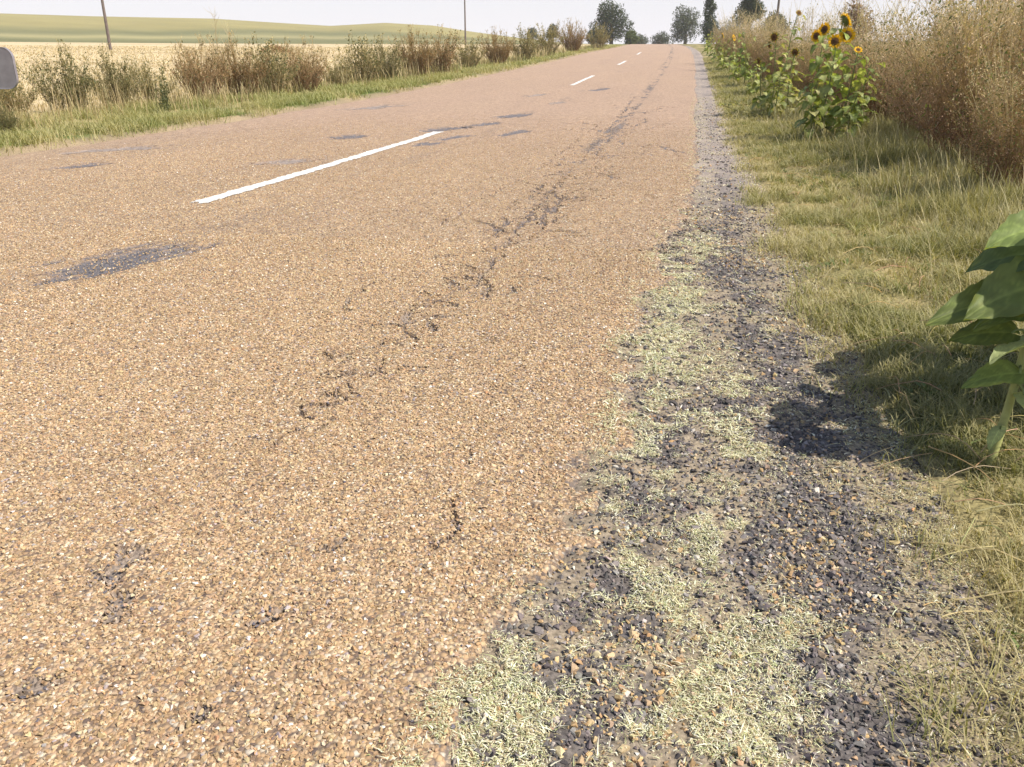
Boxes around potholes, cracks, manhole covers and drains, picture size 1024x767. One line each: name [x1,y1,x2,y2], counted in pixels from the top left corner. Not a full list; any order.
crack [269,97,686,449]
